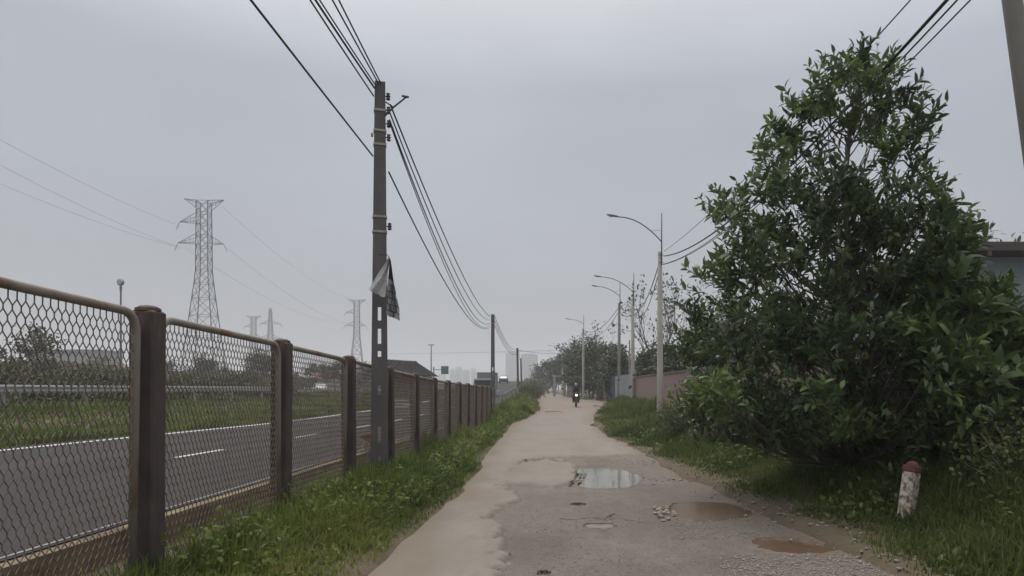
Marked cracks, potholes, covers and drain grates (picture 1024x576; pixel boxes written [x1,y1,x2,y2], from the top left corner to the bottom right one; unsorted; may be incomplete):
pothole [573,468,648,489]
pothole [670,501,756,523]
pothole [749,536,841,554]
crack [560,513,640,523]
